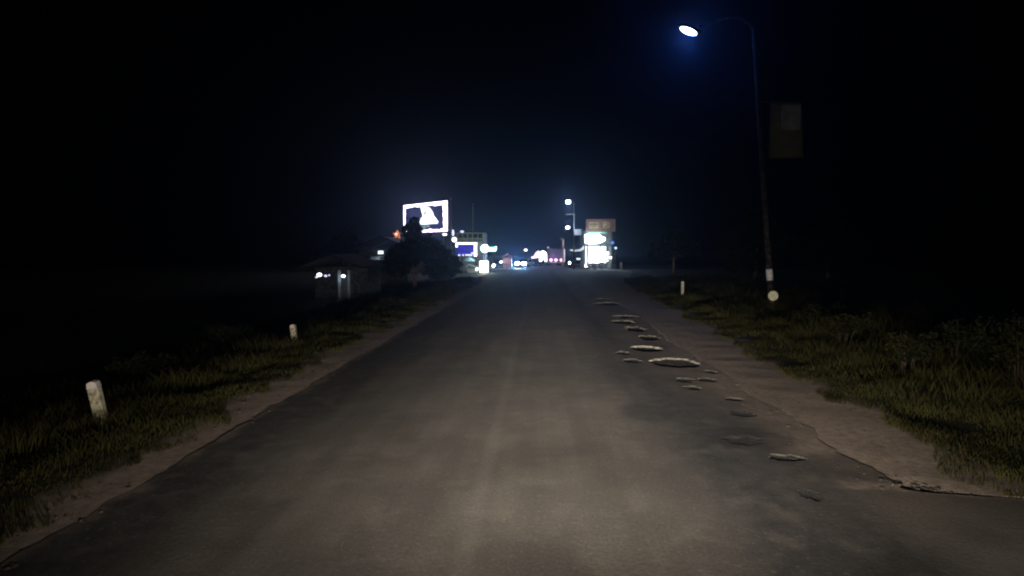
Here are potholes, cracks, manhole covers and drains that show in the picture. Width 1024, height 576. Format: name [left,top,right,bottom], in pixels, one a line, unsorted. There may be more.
pothole [769,454,808,462]
pothole [796,489,824,502]
pothole [648,358,702,368]
pothole [718,435,765,446]
